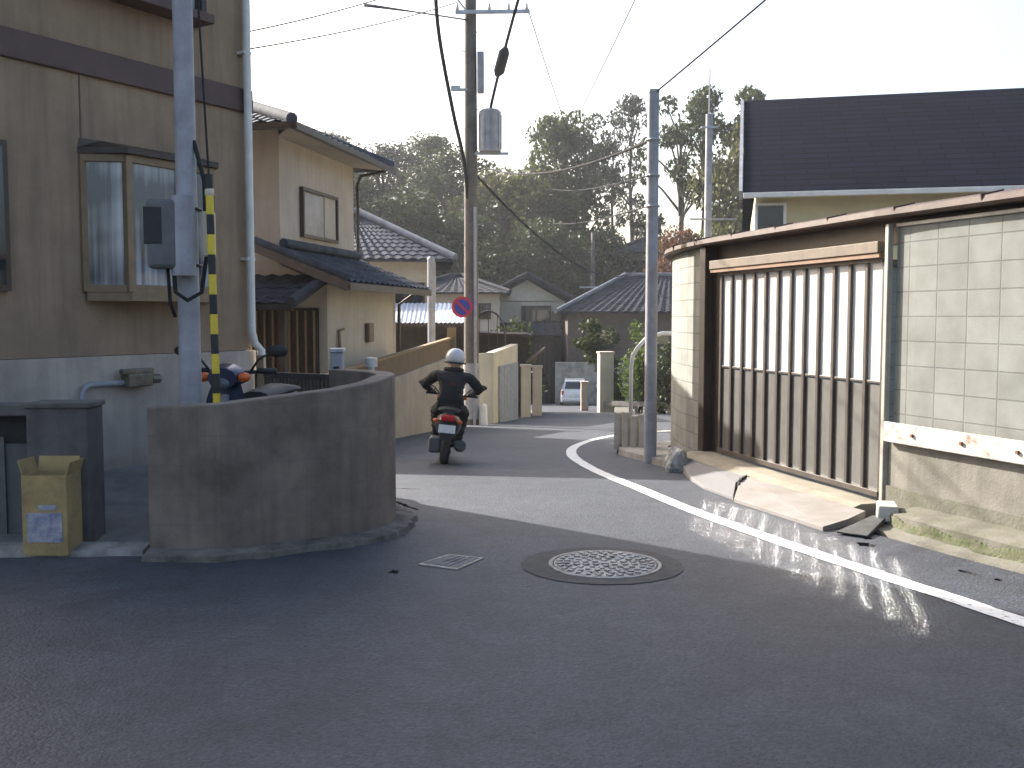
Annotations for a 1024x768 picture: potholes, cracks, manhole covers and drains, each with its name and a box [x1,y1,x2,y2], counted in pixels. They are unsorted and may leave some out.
manhole cover [521,547,684,584]
